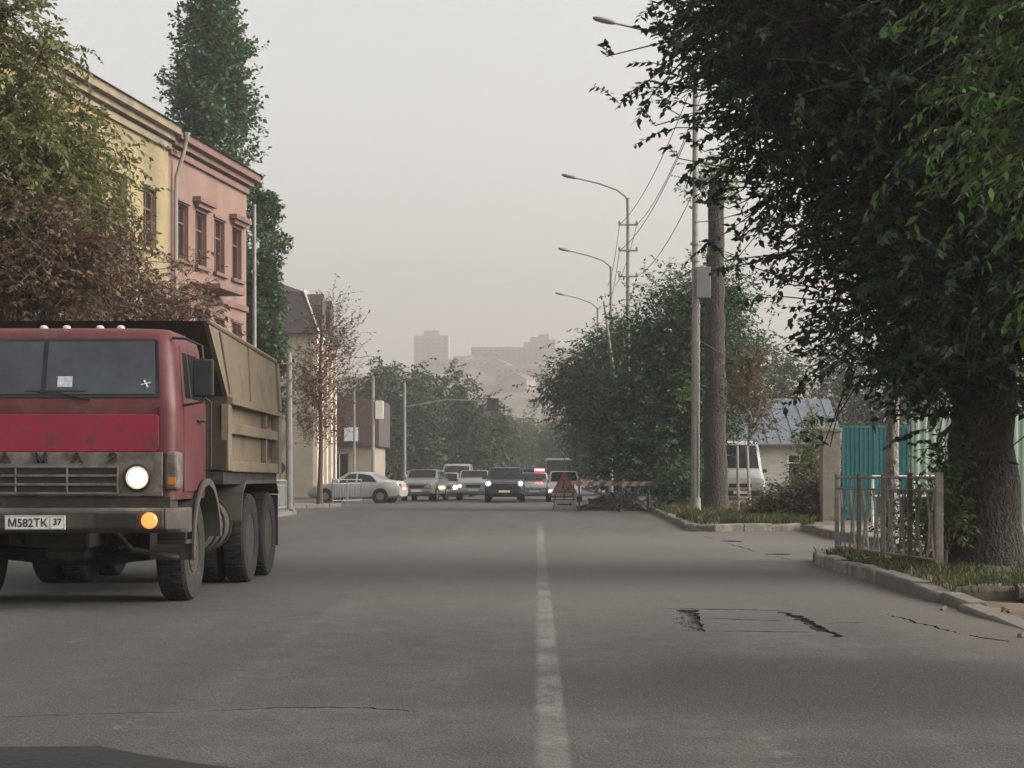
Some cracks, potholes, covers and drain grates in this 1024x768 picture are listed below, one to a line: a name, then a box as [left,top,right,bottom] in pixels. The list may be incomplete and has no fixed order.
crack [14,707,408,717]
pothole [674,610,706,631]
crack [887,614,1009,642]
